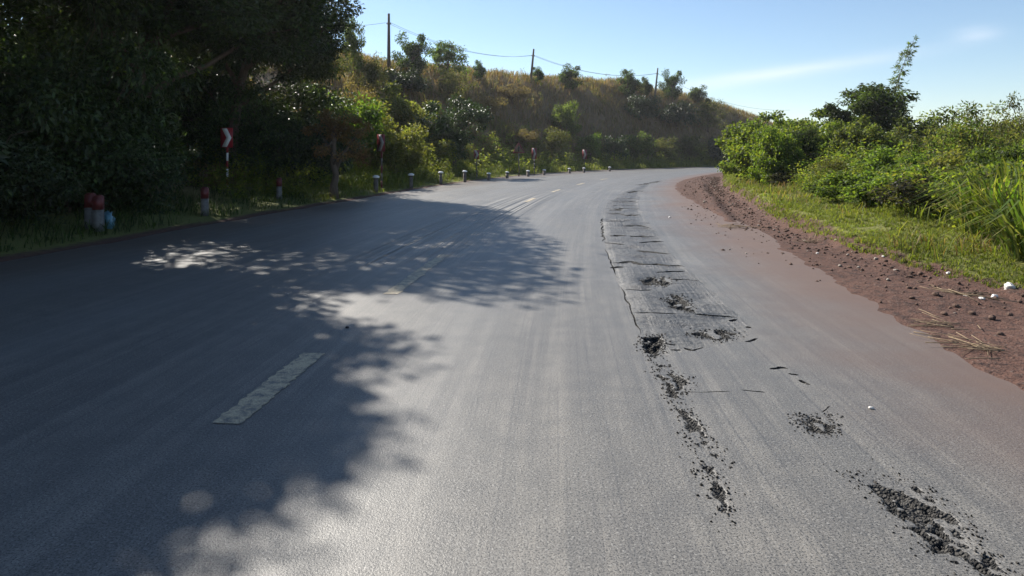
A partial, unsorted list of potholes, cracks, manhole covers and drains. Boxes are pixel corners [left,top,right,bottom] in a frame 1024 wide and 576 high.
pothole [659,294,697,313]
pothole [685,327,745,343]
pothole [667,391,745,537]
pothole [644,360,698,403]
pothole [824,454,1023,576]
pothole [633,331,672,361]
pothole [787,411,848,438]
crack [600,181,758,342]
